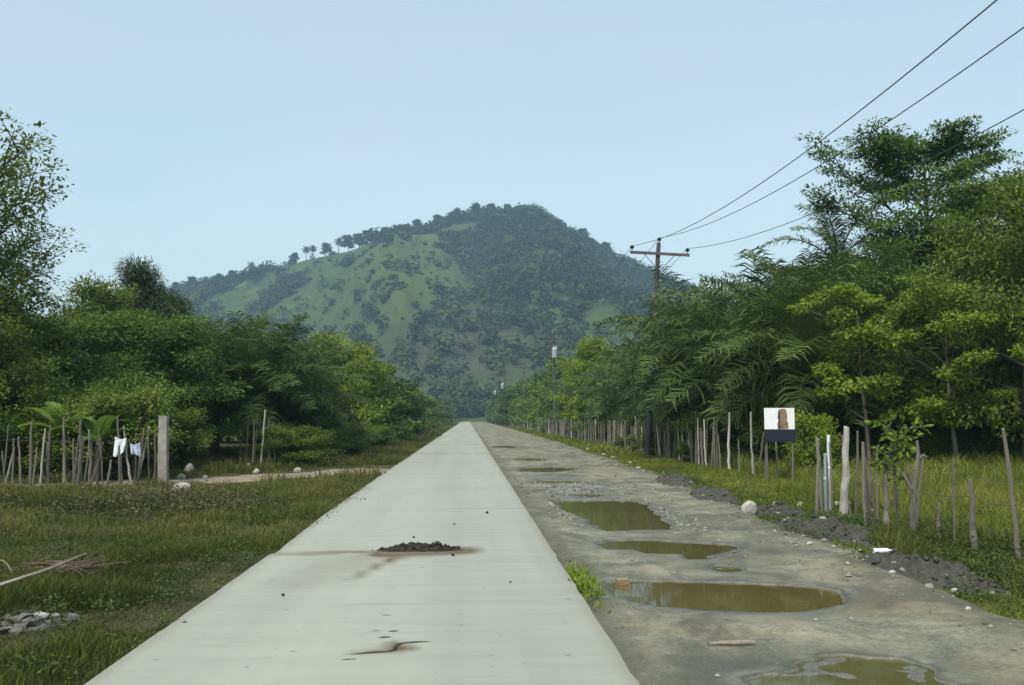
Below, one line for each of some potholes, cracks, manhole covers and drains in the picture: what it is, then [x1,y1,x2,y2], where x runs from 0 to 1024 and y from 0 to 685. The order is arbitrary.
pothole [595,539,741,559]
pothole [708,564,745,572]
pothole [553,500,675,531]
pothole [744,653,963,685]
pothole [600,579,846,612]
